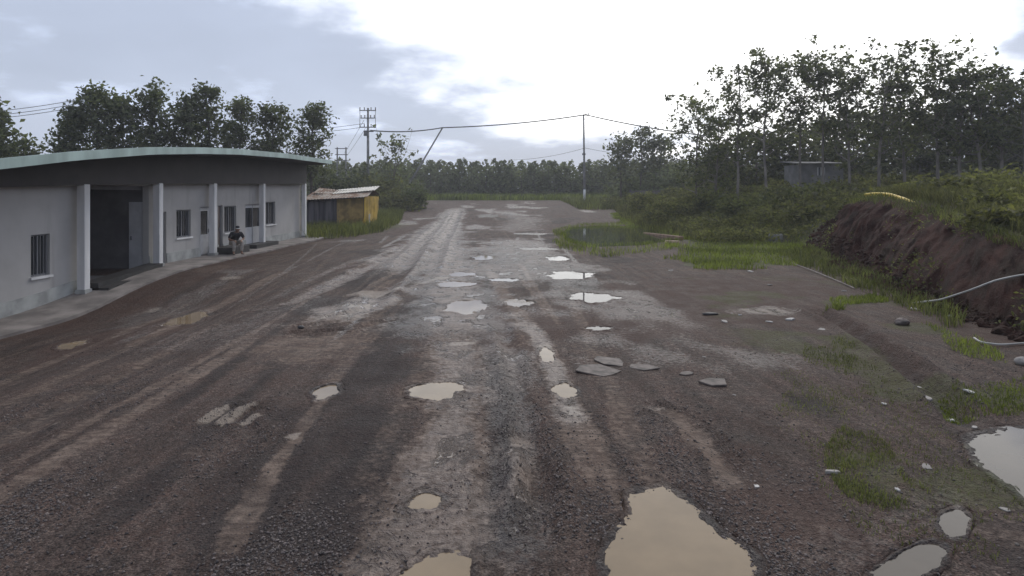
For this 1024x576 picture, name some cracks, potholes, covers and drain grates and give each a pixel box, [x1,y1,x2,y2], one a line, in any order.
pothole [544,270,598,280]
pothole [863,537,956,576]
pothole [390,541,485,576]
pothole [590,481,769,576]
pothole [438,298,493,316]
pothole [395,489,452,514]
pothole [534,342,560,369]
pothole [402,379,470,403]
pothole [562,291,628,304]
pothole [499,297,540,309]
pothole [50,338,95,352]
pothole [152,310,214,328]
